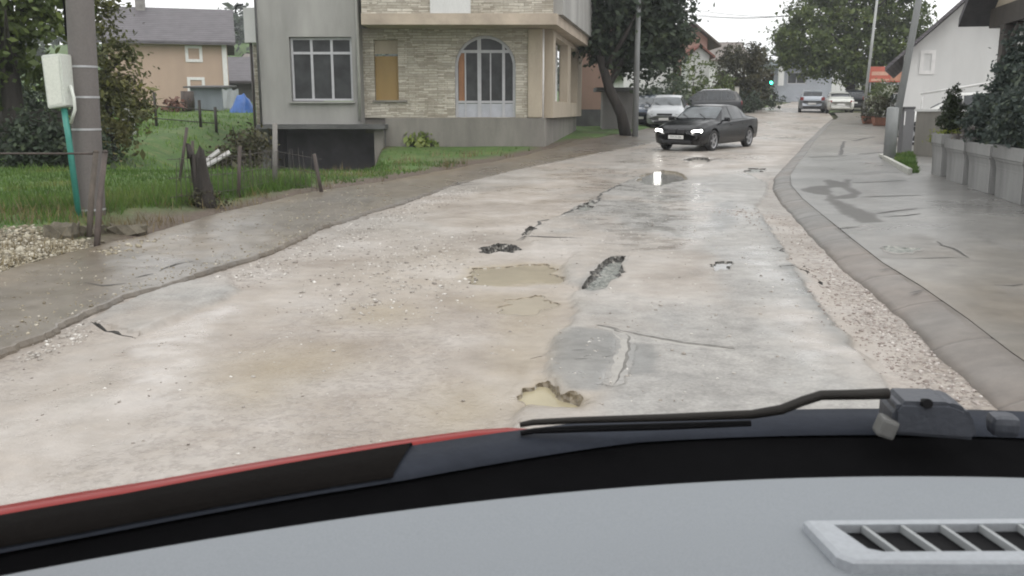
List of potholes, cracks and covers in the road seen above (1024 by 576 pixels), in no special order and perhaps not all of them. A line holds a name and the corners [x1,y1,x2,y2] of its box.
pothole [465,242,541,256]
crack [516,185,619,241]
pothole [503,372,596,411]
pothole [578,254,640,294]
crack [572,325,734,386]
pothole [482,292,576,319]
crack [82,322,140,339]
pothole [453,261,579,287]
pothole [669,156,728,164]
pothole [624,169,701,186]
